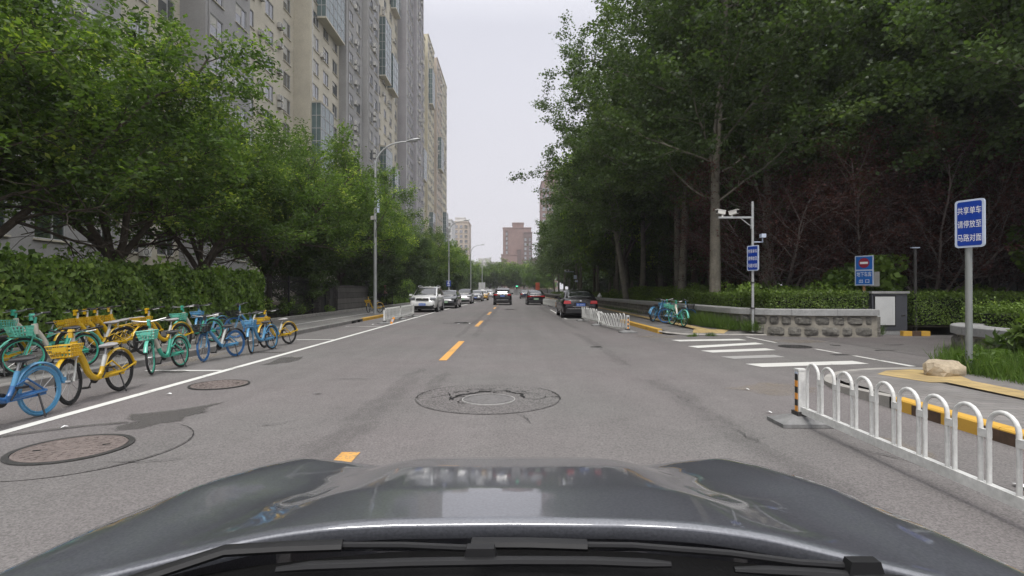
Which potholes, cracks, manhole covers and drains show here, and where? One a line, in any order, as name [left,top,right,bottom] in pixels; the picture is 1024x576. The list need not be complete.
crack [431,389,558,423]
manhole cover [0,434,135,466]
manhole cover [462,394,515,406]
manhole cover [188,379,250,390]
